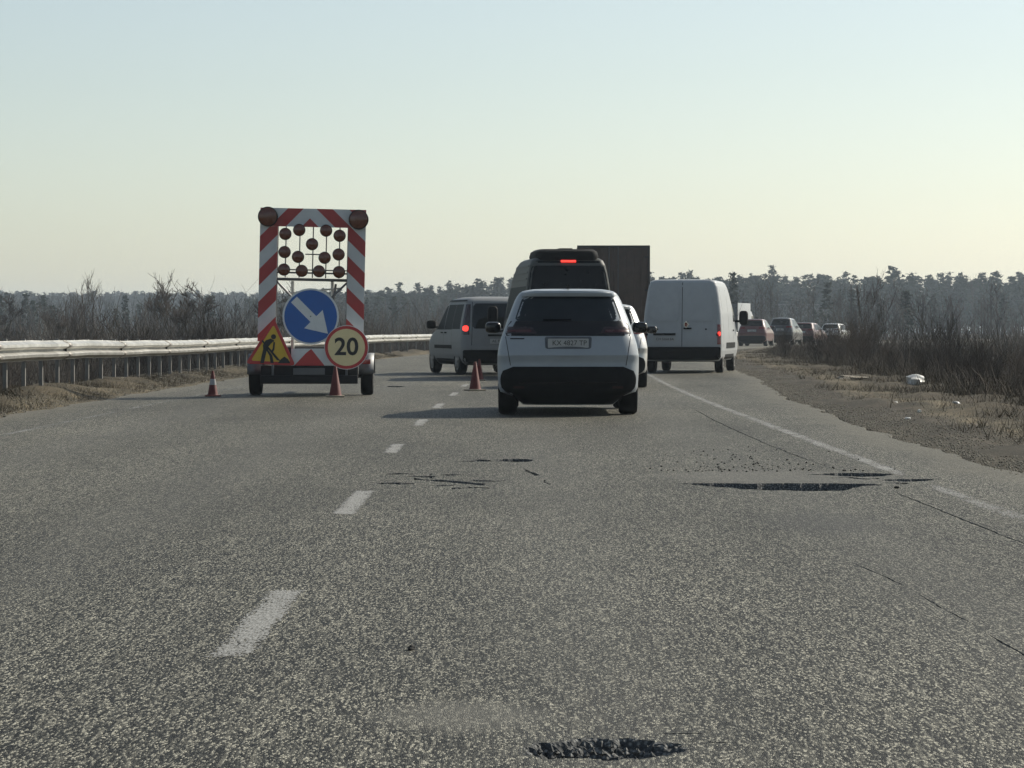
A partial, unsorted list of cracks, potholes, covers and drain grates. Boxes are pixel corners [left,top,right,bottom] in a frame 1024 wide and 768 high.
crack [696,410,1024,544]
pothole [679,483,877,491]
crack [375,459,499,489]
crack [853,563,1024,656]
pothole [523,738,693,761]
